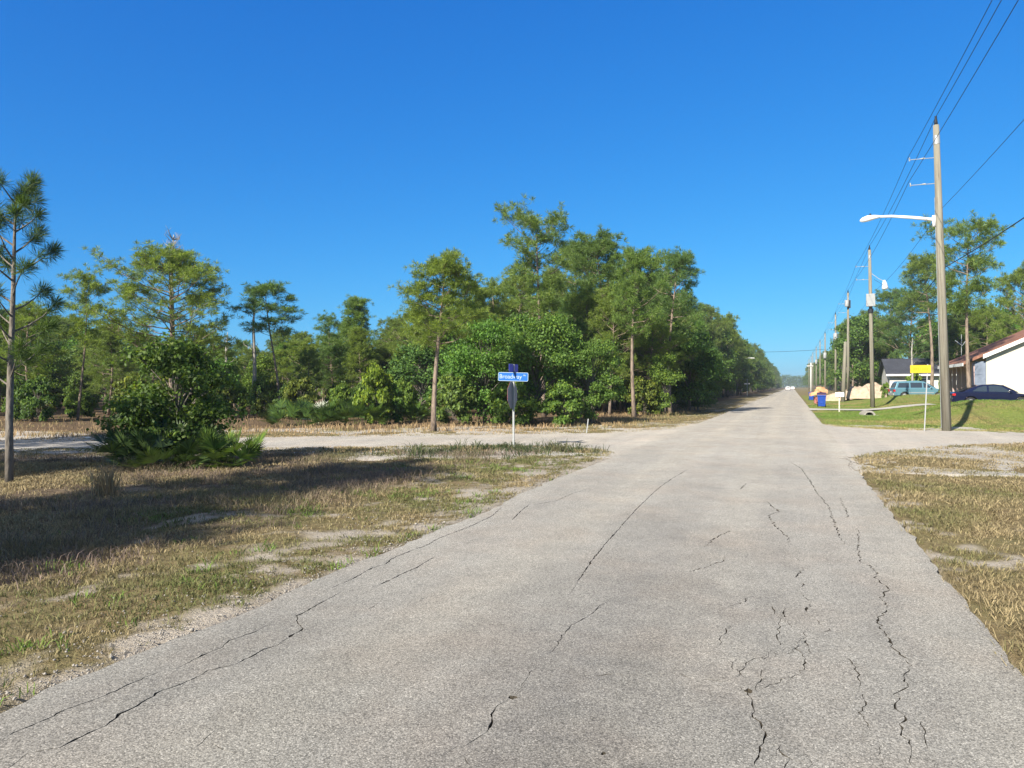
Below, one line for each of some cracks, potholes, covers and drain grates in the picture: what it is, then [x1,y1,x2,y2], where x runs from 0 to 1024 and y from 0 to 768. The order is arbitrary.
crack [346,491,580,584]
crack [600,504,830,768]
crack [792,463,937,766]
crack [9,595,335,768]
crack [465,704,500,763]
